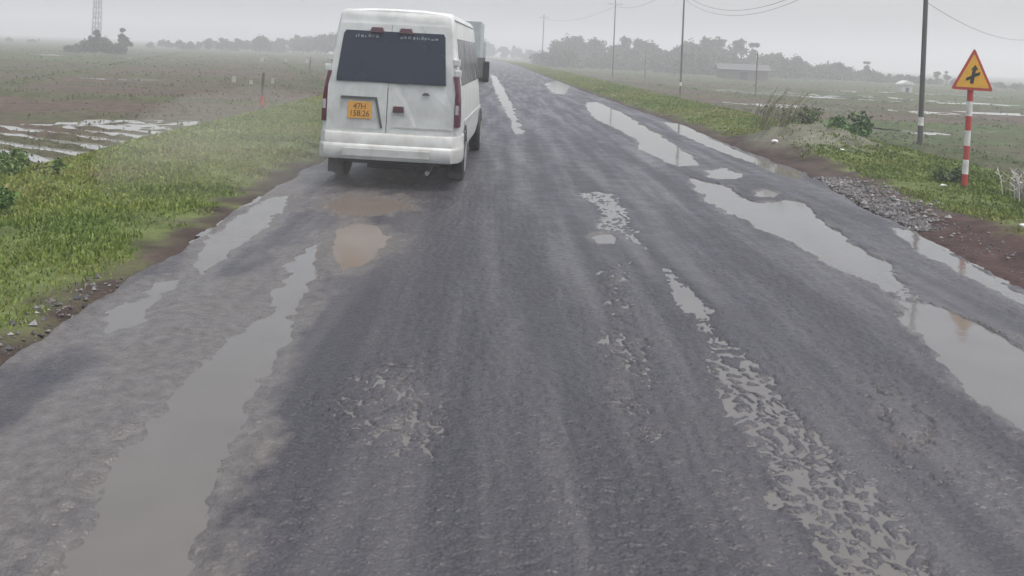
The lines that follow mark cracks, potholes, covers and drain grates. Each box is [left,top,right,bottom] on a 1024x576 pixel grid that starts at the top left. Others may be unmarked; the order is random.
pothole [585,101,701,167]
pothole [583,231,623,244]
pothole [888,226,1024,305]
pothole [313,191,418,218]
pothole [688,176,906,293]
pothole [19,239,331,576]
pothole [326,220,398,276]
